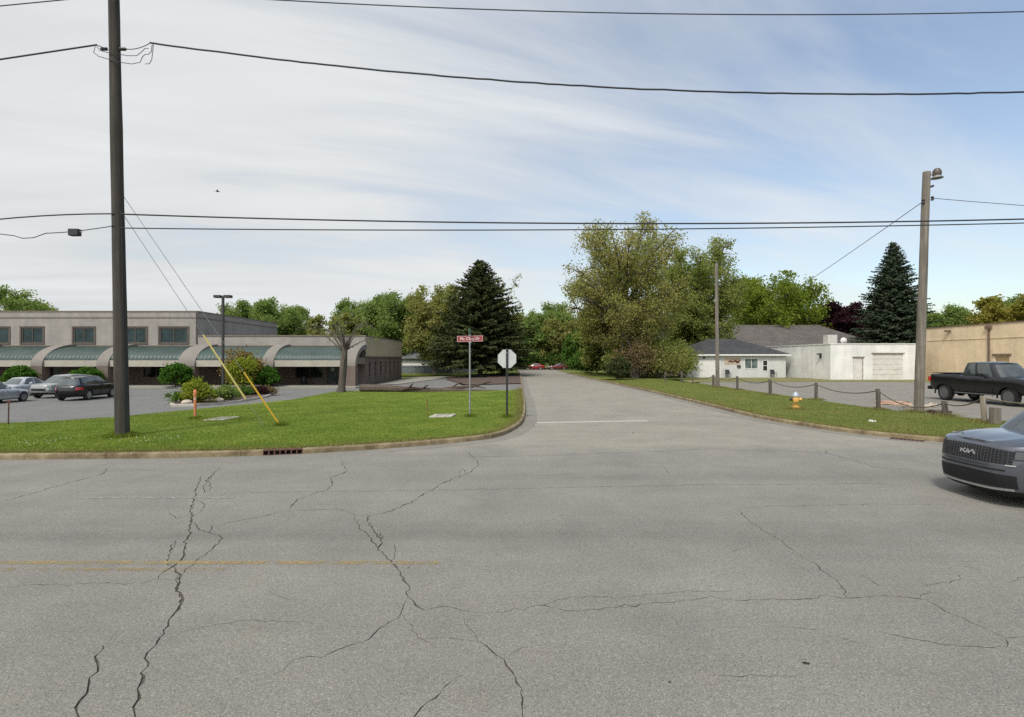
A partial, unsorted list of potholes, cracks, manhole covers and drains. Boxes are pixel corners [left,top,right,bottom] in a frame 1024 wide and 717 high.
crack [215,452,1017,673]
crack [463,617,524,717]
crack [18,469,313,717]
